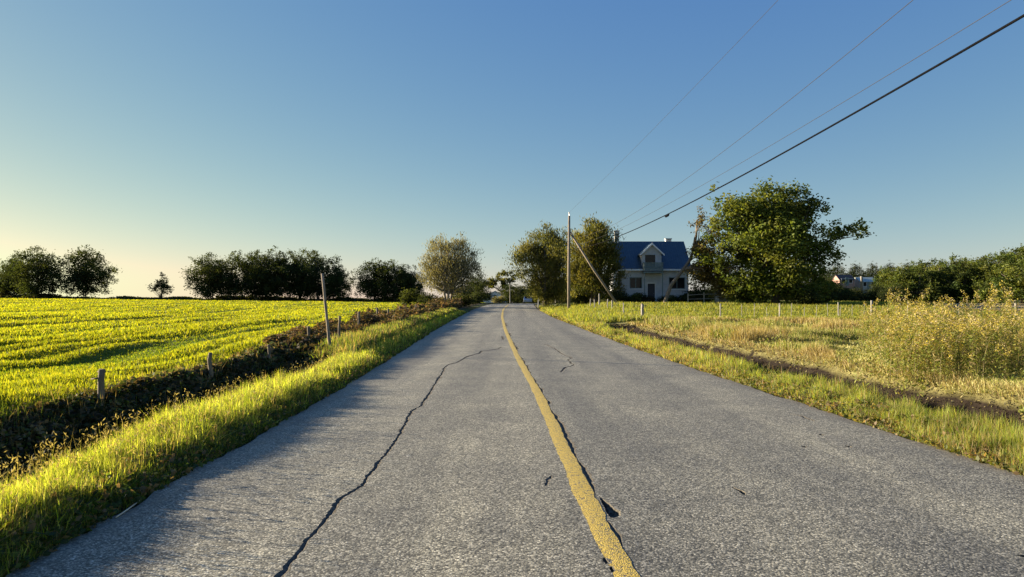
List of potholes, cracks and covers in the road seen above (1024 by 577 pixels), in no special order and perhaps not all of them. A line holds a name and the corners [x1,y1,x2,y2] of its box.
crack [274,336,504,577]
crack [547,345,574,372]
